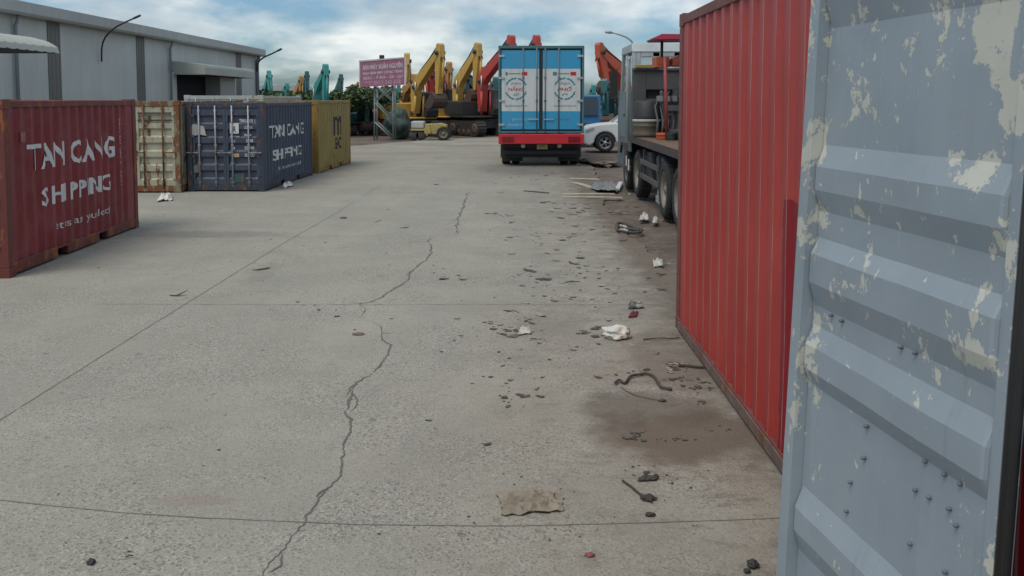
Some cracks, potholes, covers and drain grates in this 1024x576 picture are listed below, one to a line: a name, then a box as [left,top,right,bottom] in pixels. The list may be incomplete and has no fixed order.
crack [262,238,432,576]
